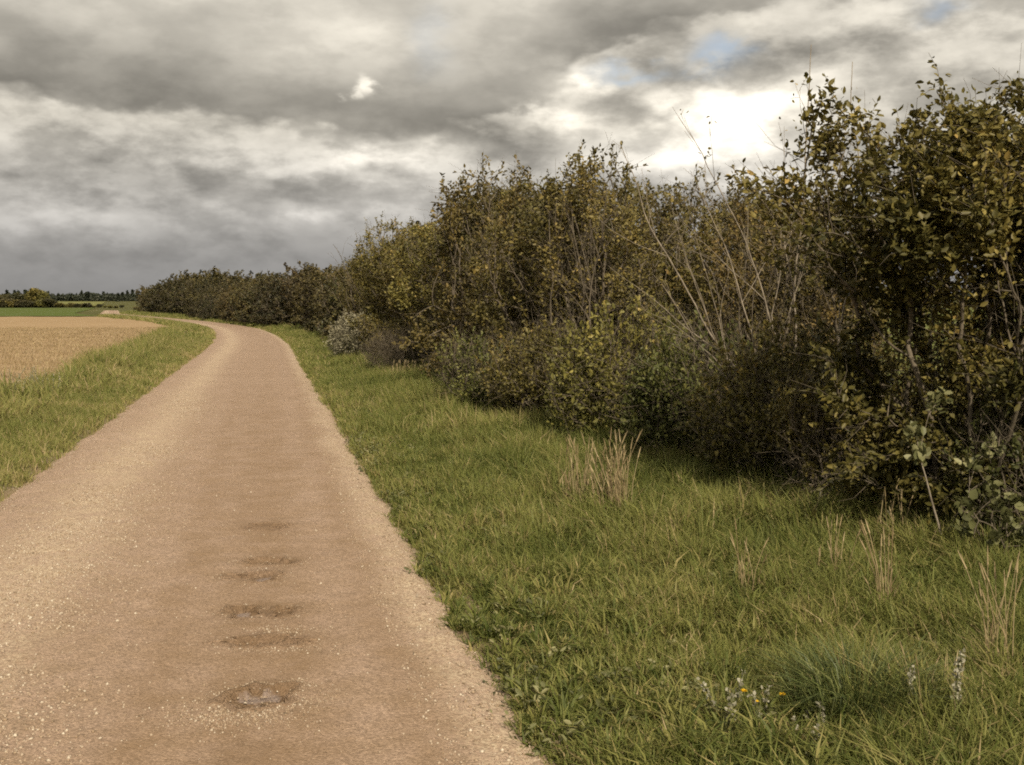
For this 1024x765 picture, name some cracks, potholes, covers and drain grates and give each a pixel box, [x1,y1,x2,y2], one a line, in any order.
pothole [241,522,294,531]
pothole [207,681,305,713]
pothole [217,570,287,584]
pothole [202,633,318,649]
pothole [216,604,277,620]
pothole [240,555,302,567]
pothole [258,605,304,619]
